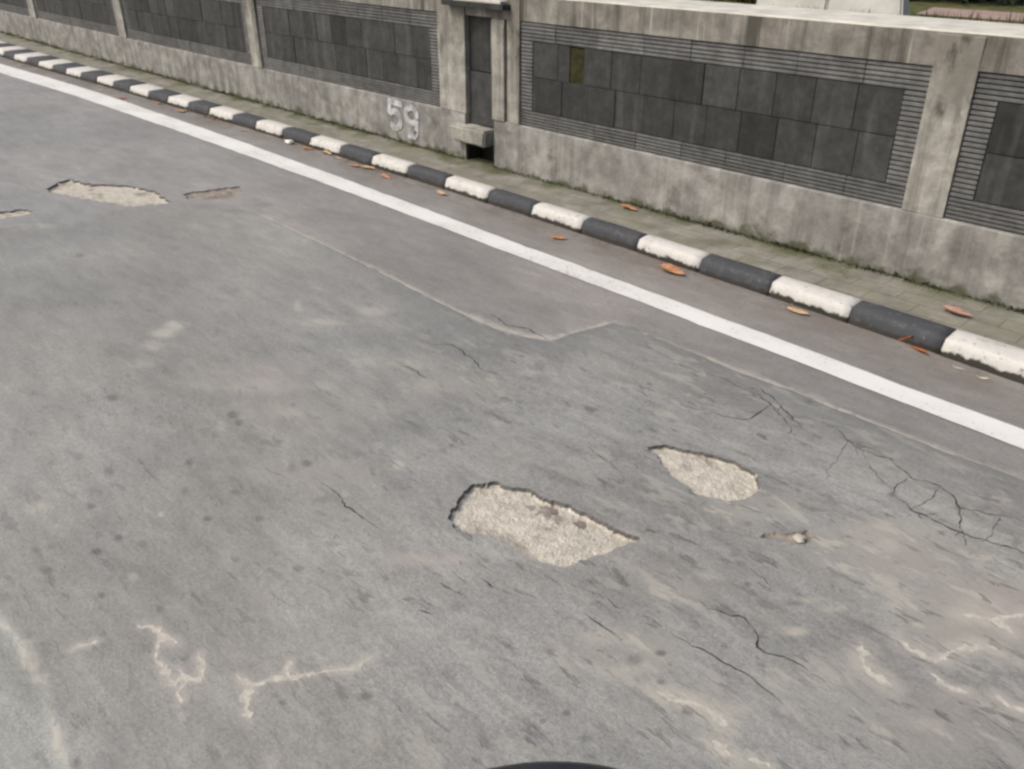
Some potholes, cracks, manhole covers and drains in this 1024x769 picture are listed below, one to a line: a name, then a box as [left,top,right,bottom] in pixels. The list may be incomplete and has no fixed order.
crack [994,694,1024,713]
pothole [448,481,641,567]
crack [856,613,1024,694]
pothole [46,179,171,207]
crack [320,482,376,527]
pothole [760,530,815,545]
crack [237,656,373,718]
crack [656,602,825,769]
crack [73,640,97,649]
pothole [183,186,244,201]
pothole [648,444,760,502]
crack [824,421,1024,553]
